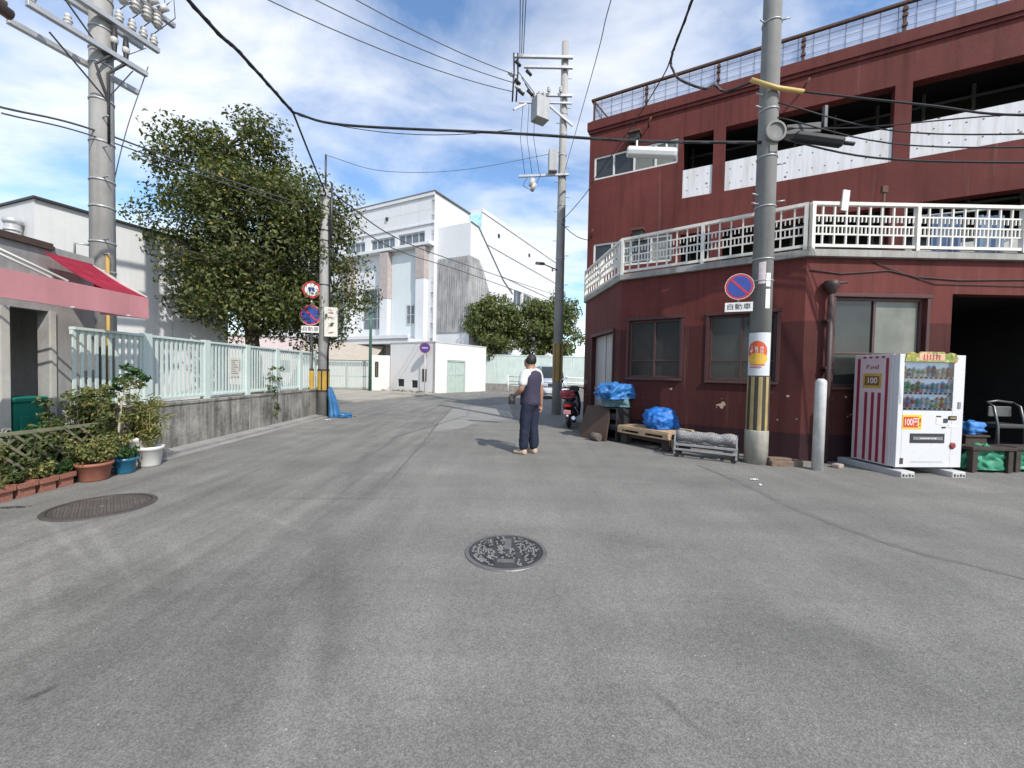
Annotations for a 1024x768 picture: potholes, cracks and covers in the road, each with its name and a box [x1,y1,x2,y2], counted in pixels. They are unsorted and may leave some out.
manhole cover [37,493,158,522]
manhole cover [465,534,547,572]
